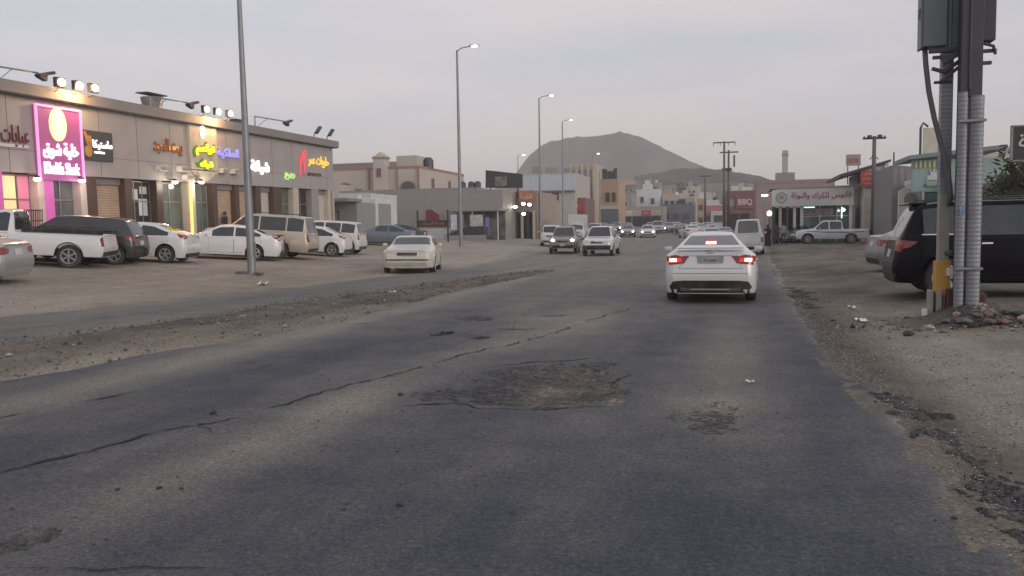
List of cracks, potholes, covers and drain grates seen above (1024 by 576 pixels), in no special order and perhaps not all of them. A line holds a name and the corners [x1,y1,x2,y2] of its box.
crack [1,308,629,472]
pothole [410,362,637,412]
